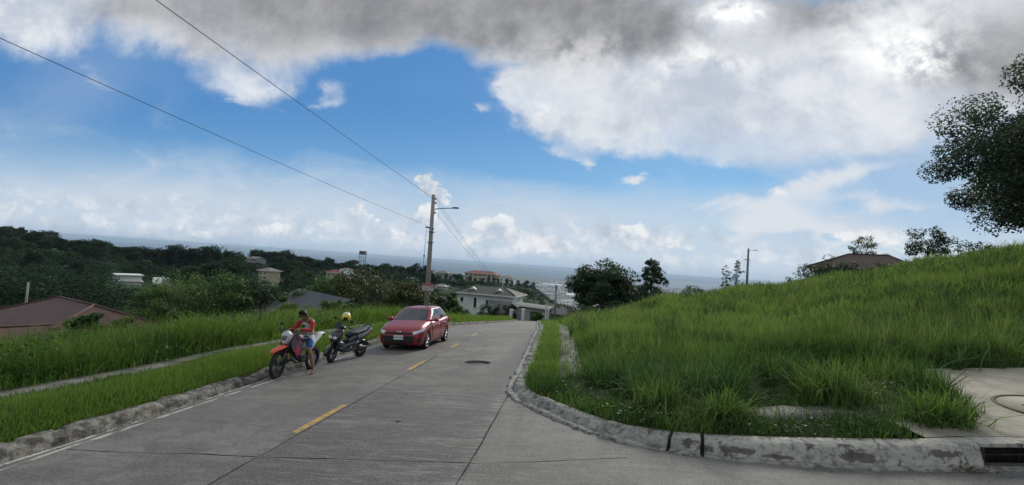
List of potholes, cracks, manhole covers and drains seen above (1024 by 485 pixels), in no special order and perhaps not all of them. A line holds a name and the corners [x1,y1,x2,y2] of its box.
manhole cover [990,394,1024,414]
drain grate [951,436,1024,471]
